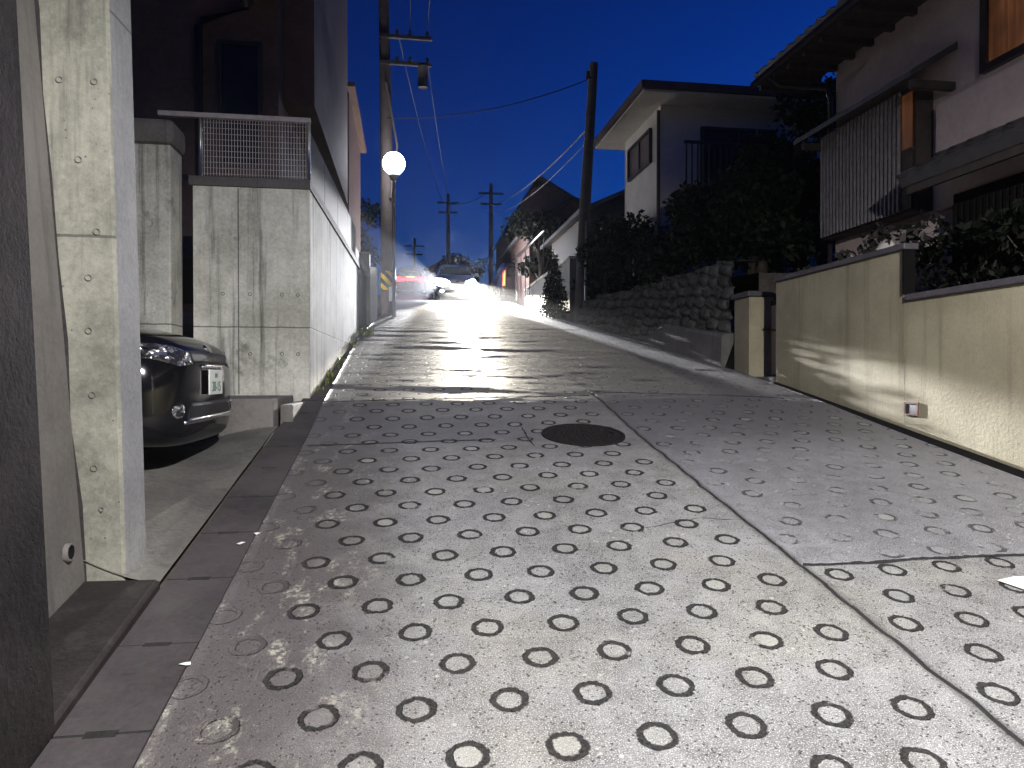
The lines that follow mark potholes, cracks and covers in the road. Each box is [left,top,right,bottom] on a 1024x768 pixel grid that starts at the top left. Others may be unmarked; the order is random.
manhole cover [542,423,625,447]
